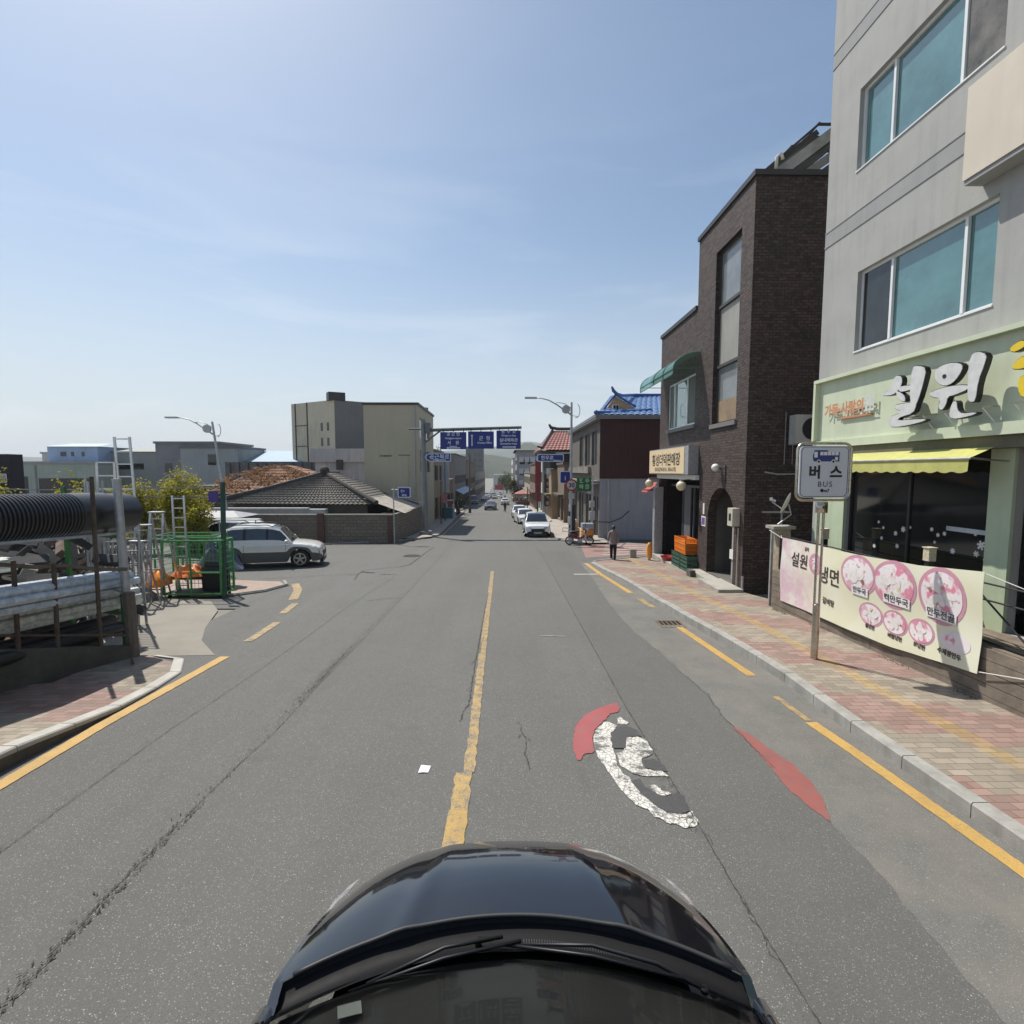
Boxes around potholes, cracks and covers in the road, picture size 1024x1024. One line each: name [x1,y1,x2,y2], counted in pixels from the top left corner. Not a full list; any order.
drain grate [655,620,687,628]
crack [459,593,489,721]
crack [0,548,448,1014]
